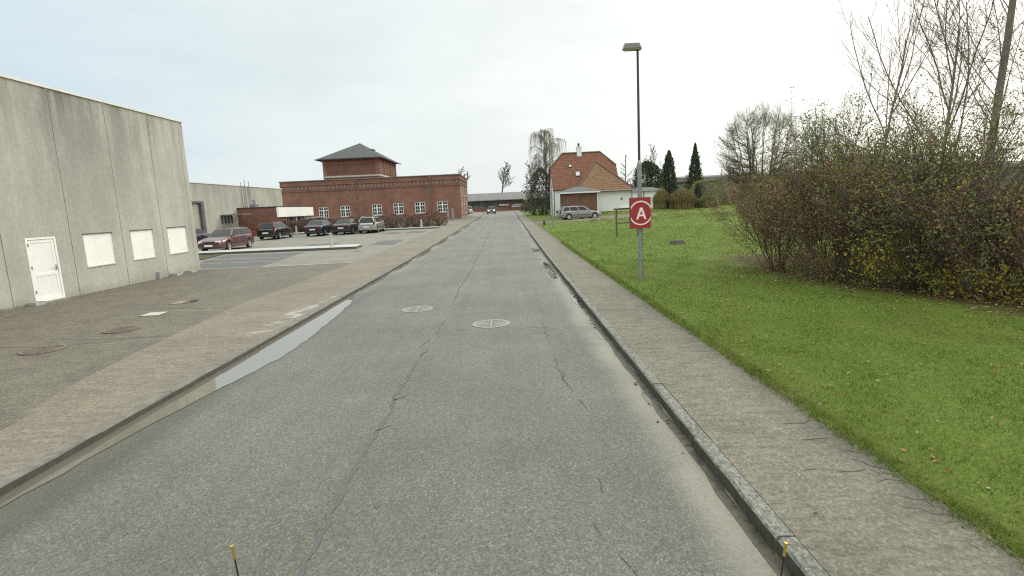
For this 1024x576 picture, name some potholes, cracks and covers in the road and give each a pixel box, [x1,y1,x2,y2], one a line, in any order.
manhole cover [472,319,510,328]
manhole cover [102,325,141,334]
manhole cover [18,344,68,356]
crack [780,419,957,551]
